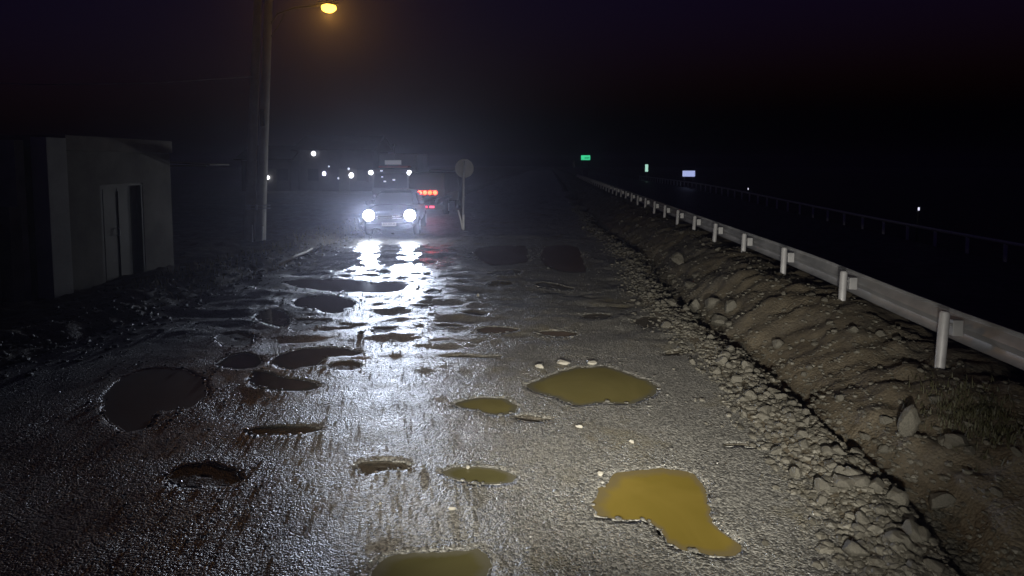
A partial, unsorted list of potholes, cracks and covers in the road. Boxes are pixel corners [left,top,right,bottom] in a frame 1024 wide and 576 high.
pothole [166,463,241,488]
pothole [369,547,493,576]
pothole [588,466,744,559]
pothole [101,368,209,433]
pothole [452,397,519,415]
pothole [254,308,291,328]
pothole [440,466,518,485]
pothole [525,366,659,406]
pothole [471,245,531,266]
pothole [539,245,587,273]
pothole [292,295,357,313]
pothole [269,347,365,370]
